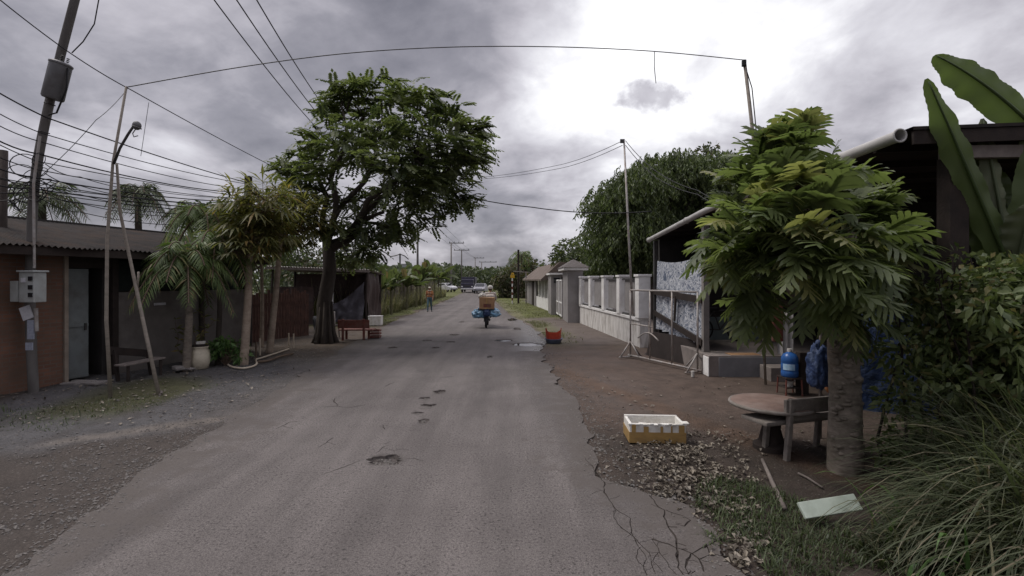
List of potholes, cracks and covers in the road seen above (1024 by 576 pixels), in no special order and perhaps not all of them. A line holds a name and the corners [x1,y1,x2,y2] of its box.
crack [585,458,728,575]
pothole [366,454,402,465]
